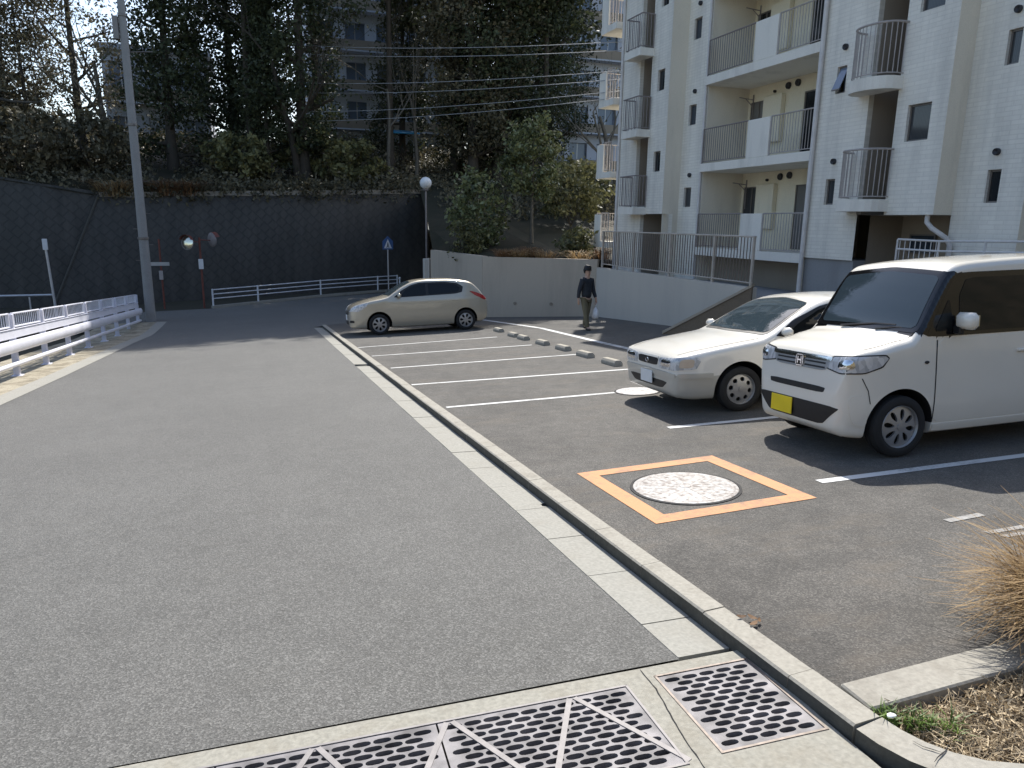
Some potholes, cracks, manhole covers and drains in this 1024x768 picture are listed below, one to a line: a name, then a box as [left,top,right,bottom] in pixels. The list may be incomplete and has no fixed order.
manhole cover [630,472,742,506]
crack [641,671,705,768]
manhole cover [614,387,660,396]
drain grate [654,658,829,754]
drain grate [198,684,692,768]
